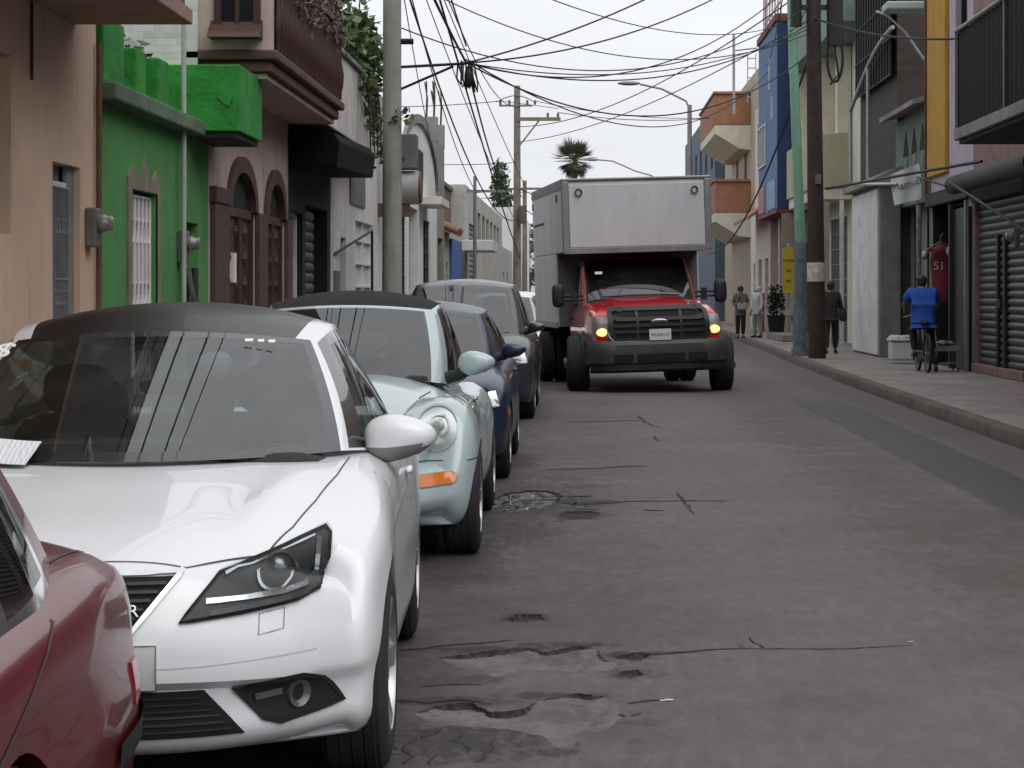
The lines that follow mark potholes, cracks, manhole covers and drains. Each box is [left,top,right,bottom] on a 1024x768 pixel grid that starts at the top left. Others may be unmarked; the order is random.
pothole [557,511,599,520]
pothole [491,490,564,512]
pothole [617,670,644,678]
crack [576,415,659,441]
crack [392,726,505,763]
crack [398,640,508,651]
pothole [416,693,626,748]
pothole [503,614,546,622]
pothole [440,646,618,677]
crack [560,492,722,513]
pothole [615,652,649,661]
crack [645,636,898,654]
